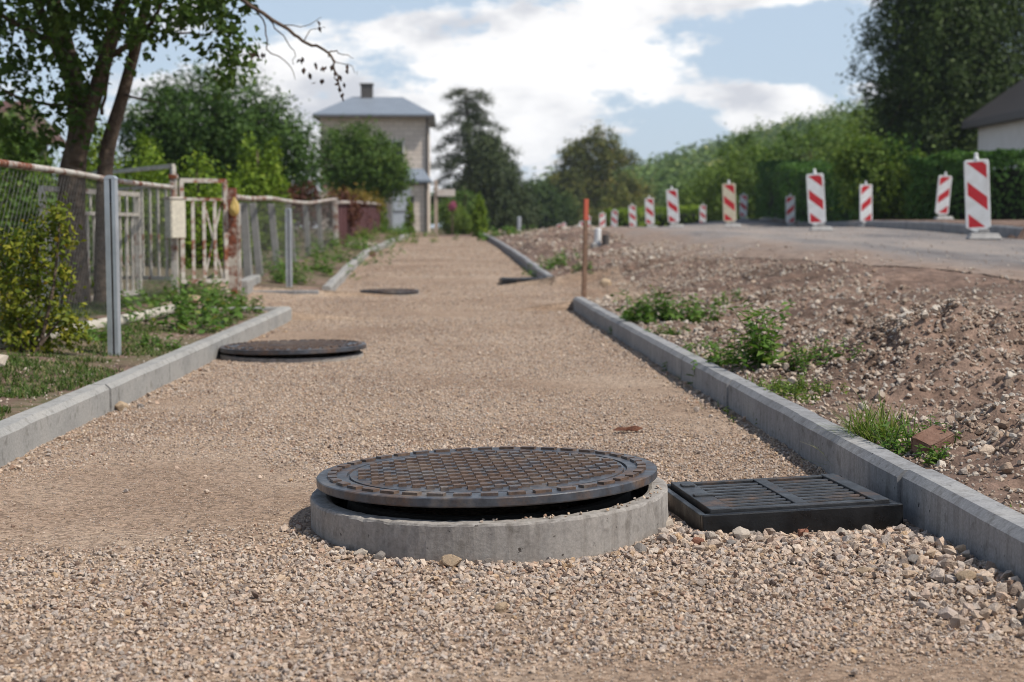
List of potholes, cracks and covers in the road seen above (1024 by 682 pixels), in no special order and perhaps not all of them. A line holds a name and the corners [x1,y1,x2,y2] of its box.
manhole cover [310,446,669,563]
manhole cover [360,288,420,296]
manhole cover [219,339,367,363]
drain grate [667,473,903,534]
